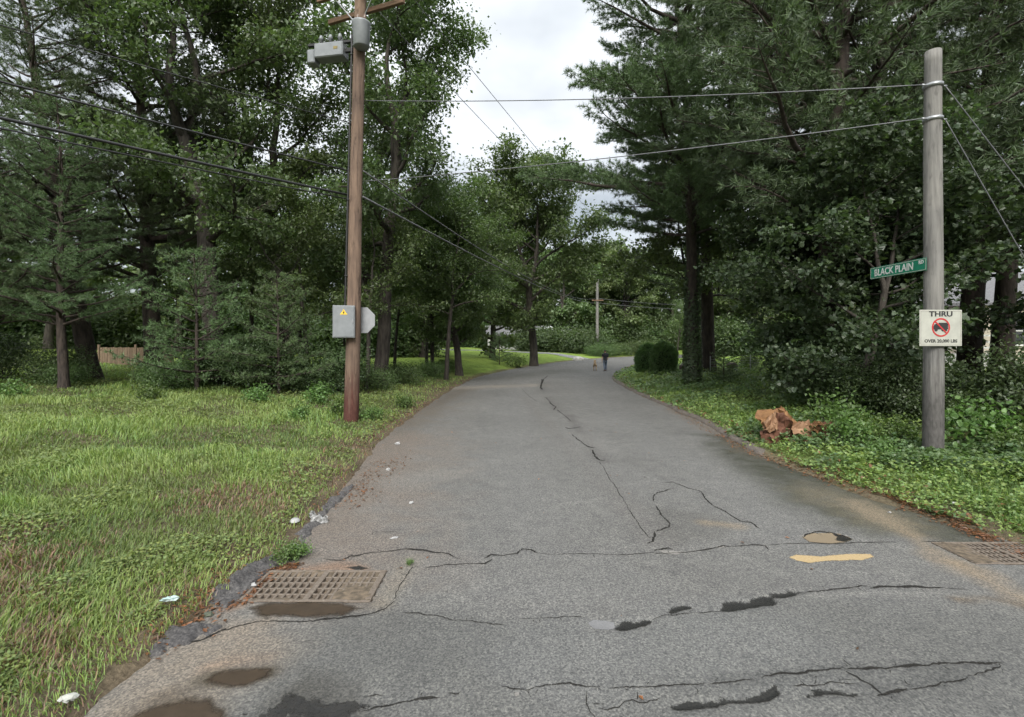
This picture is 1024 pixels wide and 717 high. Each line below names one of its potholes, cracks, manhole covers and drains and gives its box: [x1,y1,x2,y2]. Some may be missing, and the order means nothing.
crack [190,601,504,643]
pothole [616,620,652,631]
crack [505,660,1003,717]
drain grate [238,570,387,603]
pothole [806,689,857,697]
crack [646,482,759,550]
drain grate [931,542,1024,565]
pothole [803,533,852,544]
pothole [720,591,803,611]
crack [807,583,959,592]
crack [322,531,537,570]
pothole [671,685,780,711]
